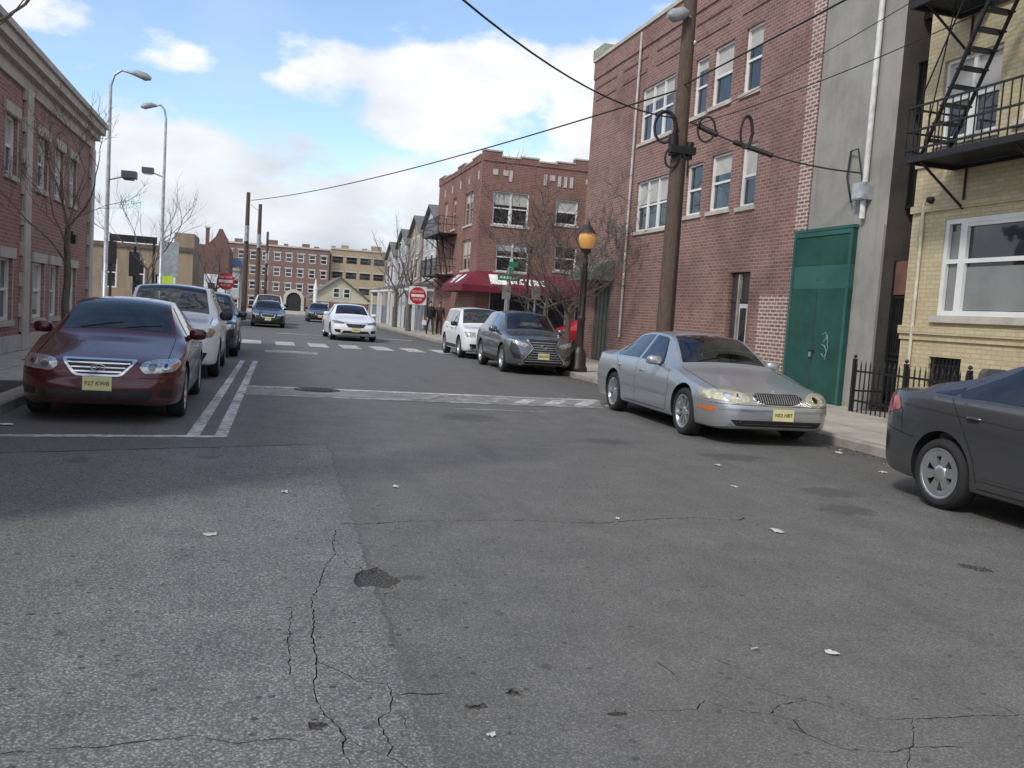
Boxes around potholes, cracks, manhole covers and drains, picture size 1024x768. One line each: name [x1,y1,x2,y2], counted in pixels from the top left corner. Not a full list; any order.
crack [345,517,744,525]
crack [287,530,384,763]
crack [653,691,1021,768]
crack [2,735,298,754]
pothole [308,718,328,730]
pothole [353,566,401,589]
